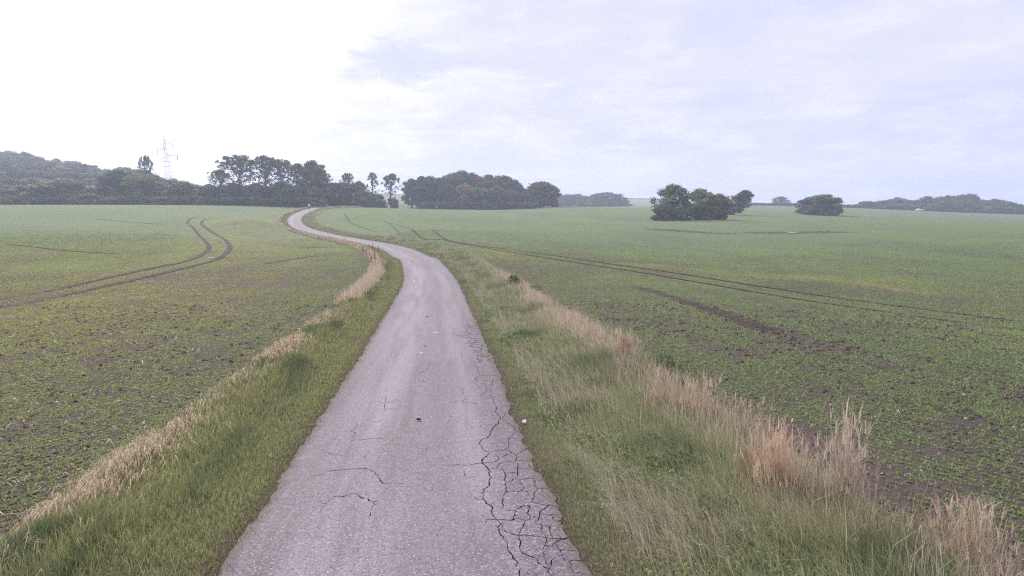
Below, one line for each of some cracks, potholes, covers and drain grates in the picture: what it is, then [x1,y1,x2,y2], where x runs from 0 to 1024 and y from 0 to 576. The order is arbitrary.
crack [317,397,401,517]
crack [455,325,509,418]
crack [457,401,580,576]
